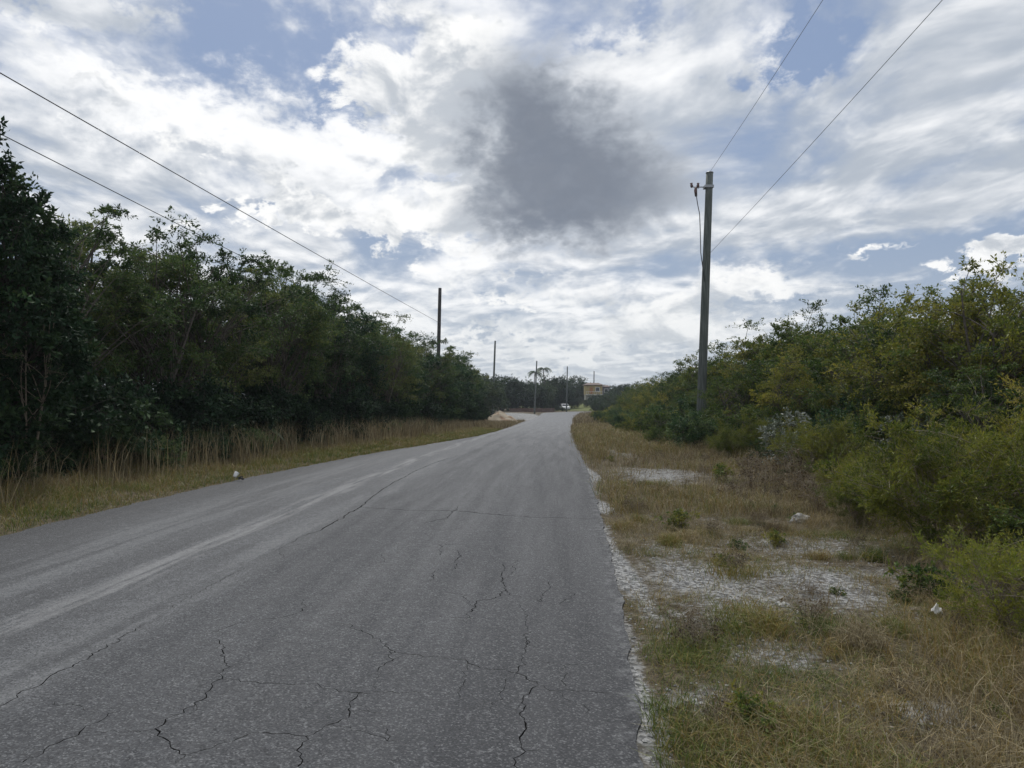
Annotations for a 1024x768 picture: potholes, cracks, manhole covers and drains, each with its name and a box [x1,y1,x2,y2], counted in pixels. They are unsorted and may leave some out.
crack [441,560,575,619]
crack [348,604,603,768]
crack [23,702,124,762]
crack [96,602,422,767]
